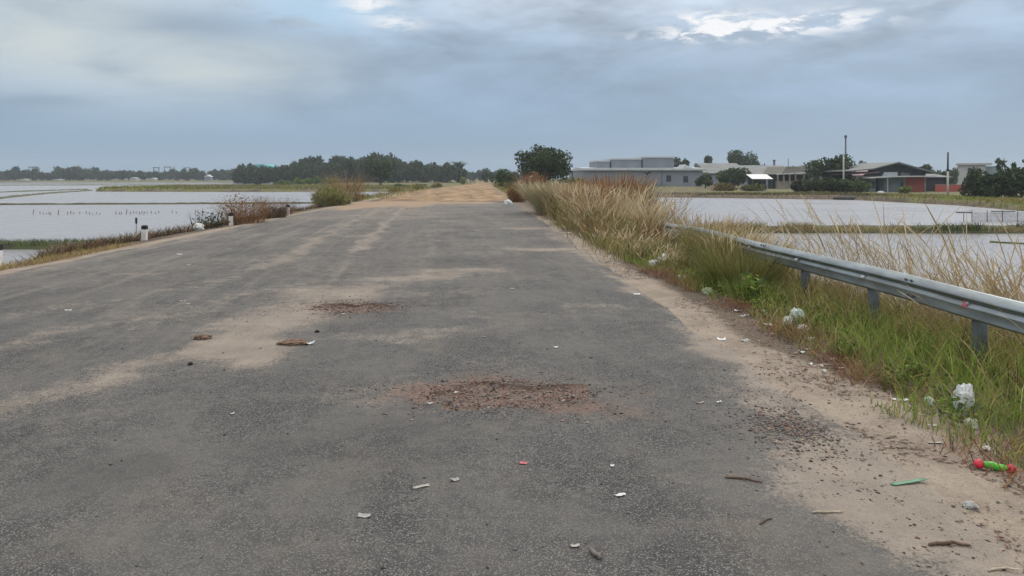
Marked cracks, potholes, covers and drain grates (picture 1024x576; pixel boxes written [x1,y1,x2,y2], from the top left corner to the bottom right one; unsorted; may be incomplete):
pothole [425,381,592,411]
pothole [314,303,397,313]
